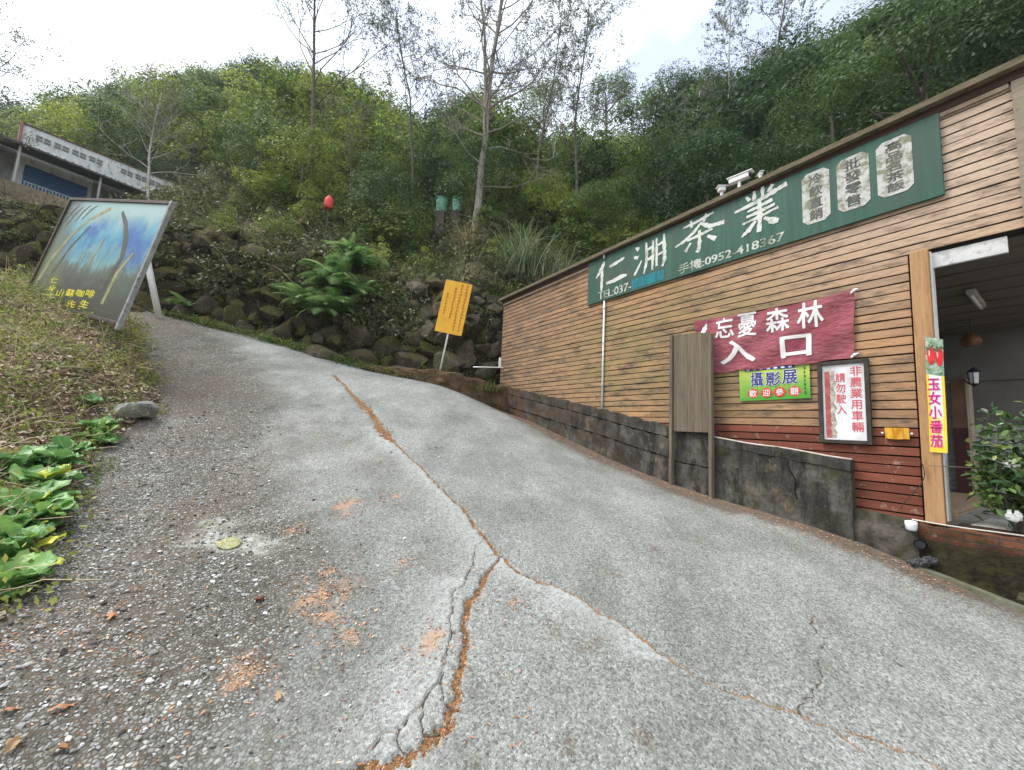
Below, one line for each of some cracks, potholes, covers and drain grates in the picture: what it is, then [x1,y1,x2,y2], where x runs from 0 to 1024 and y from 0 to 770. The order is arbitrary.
crack [333,375,941,770]
